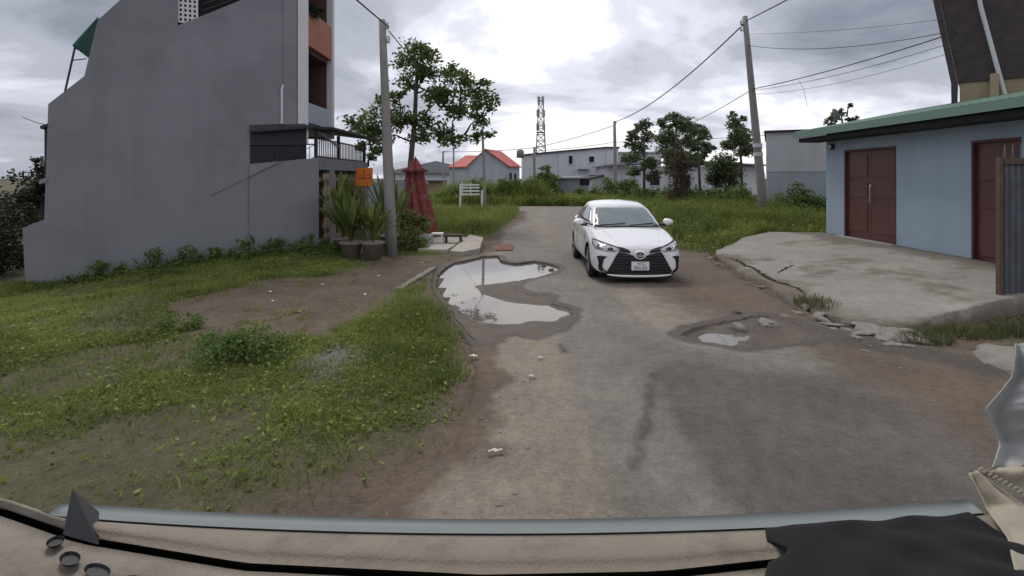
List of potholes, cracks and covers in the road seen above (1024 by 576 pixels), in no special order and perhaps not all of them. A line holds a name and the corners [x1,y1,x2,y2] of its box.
pothole [681,315,809,348]
crack [724,257,806,294]
pothole [435,256,574,343]
